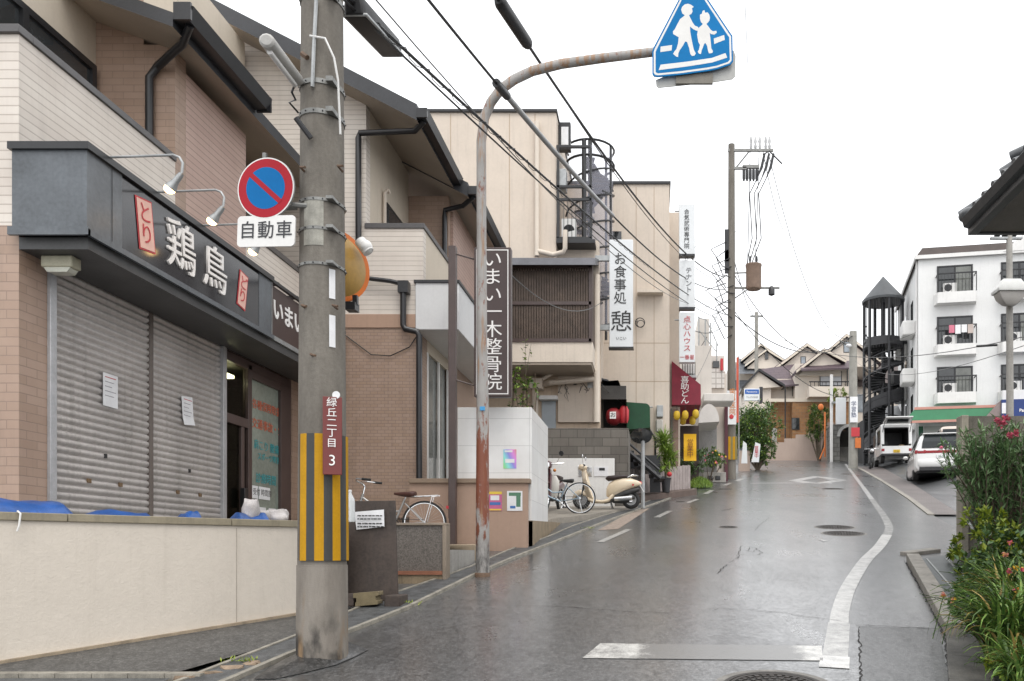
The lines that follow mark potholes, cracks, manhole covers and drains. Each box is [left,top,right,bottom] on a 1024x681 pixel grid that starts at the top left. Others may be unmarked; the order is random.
manhole cover [715,670,828,681]
